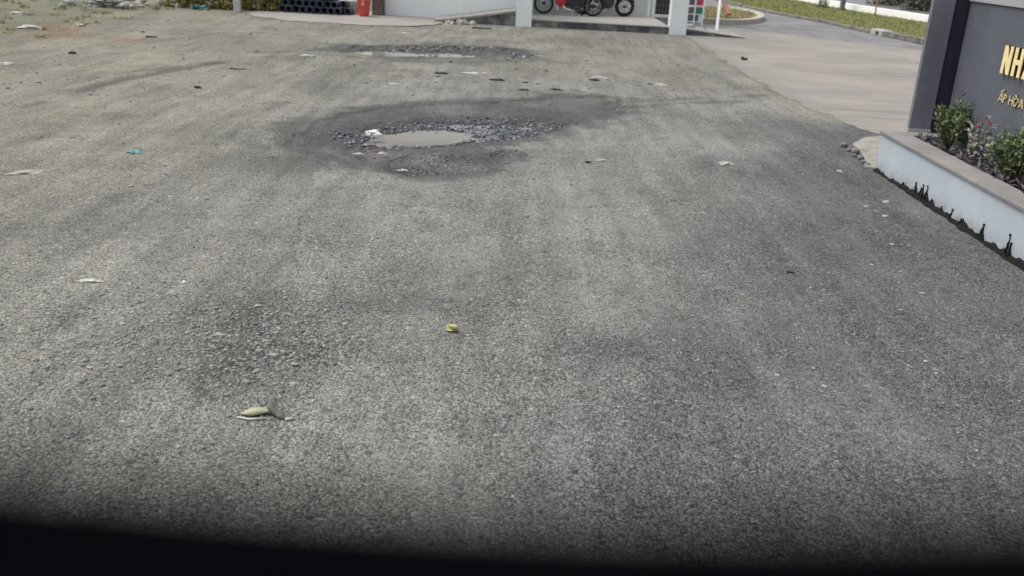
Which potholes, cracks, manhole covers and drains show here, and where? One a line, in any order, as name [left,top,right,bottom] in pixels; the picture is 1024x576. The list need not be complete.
pothole [283,95,618,163]
pothole [337,44,536,63]
